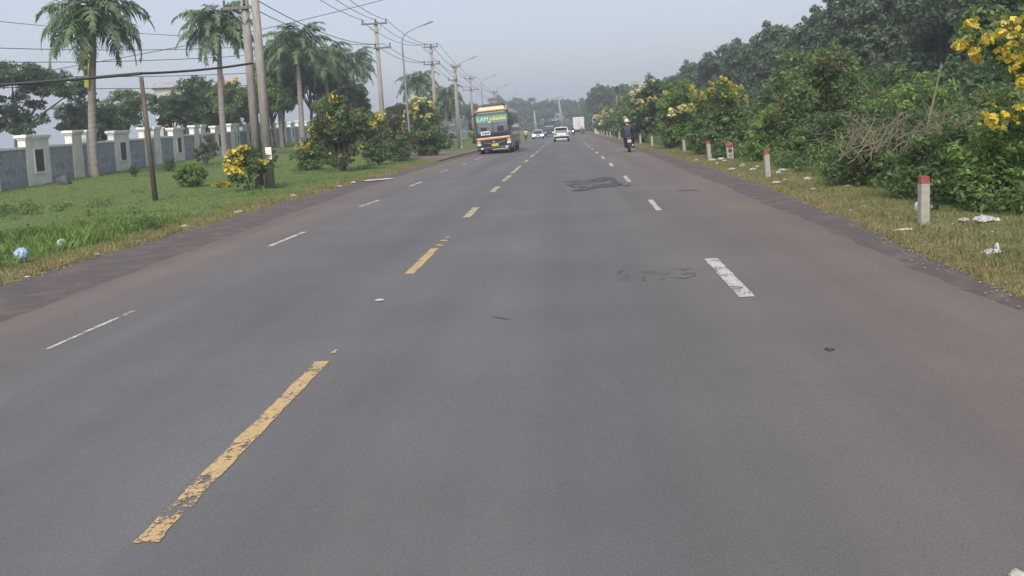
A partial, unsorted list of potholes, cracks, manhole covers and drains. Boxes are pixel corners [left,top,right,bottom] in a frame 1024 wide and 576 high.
crack [617,268,696,281]
